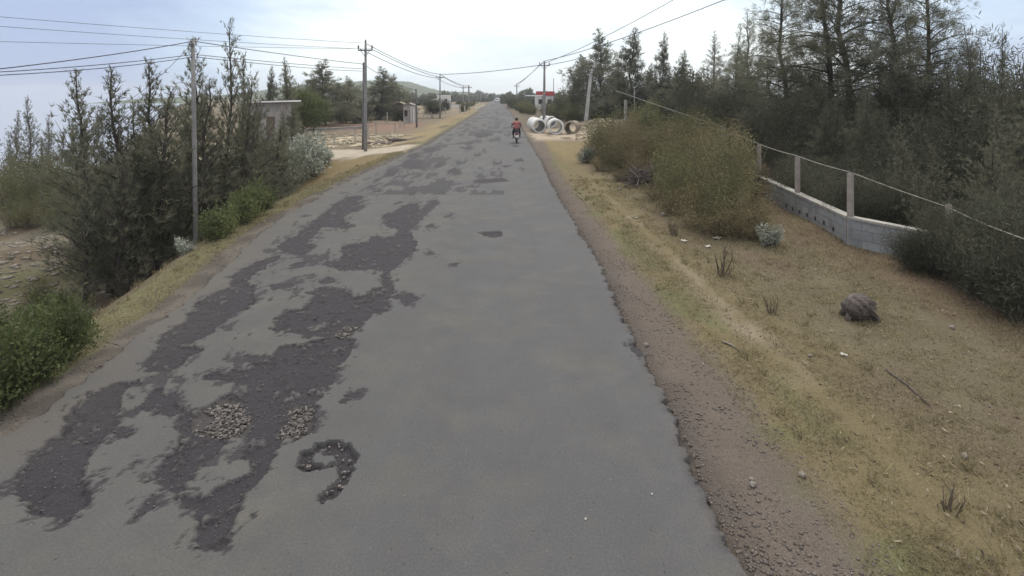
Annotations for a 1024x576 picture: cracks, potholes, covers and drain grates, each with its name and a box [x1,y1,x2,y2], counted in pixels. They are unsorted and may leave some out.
pothole [169,374,295,462]
pothole [259,390,342,463]
pothole [477,230,504,238]
pothole [294,439,362,505]
